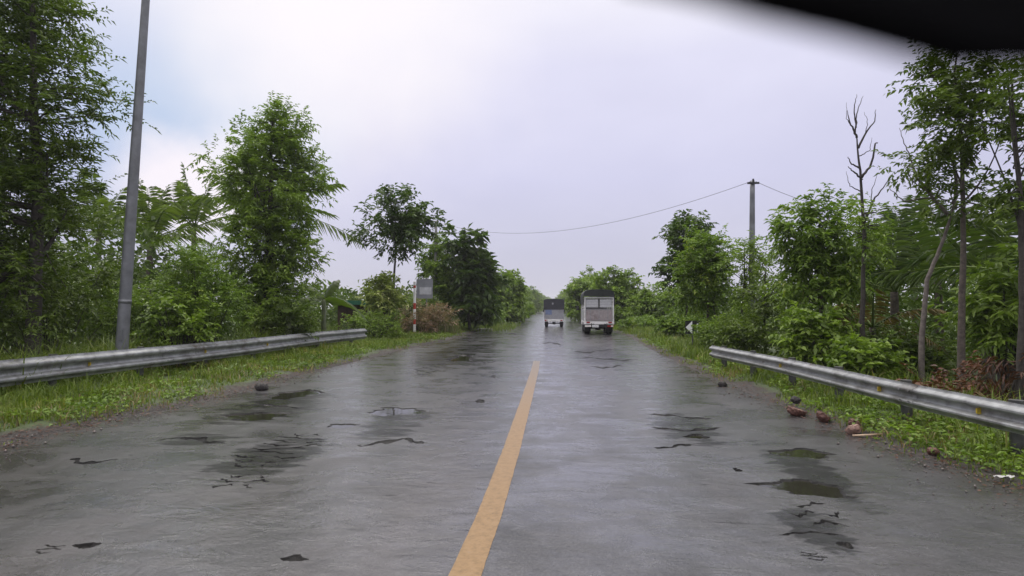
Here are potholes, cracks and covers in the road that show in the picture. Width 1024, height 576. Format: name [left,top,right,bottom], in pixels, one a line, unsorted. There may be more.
pothole [743,478,858,499]
crack [779,501,849,536]
pothole [767,448,838,459]
crack [650,413,720,449]
pothole [220,412,297,421]
pothole [268,389,325,400]
pothole [367,407,426,416]
crack [357,437,424,447]
